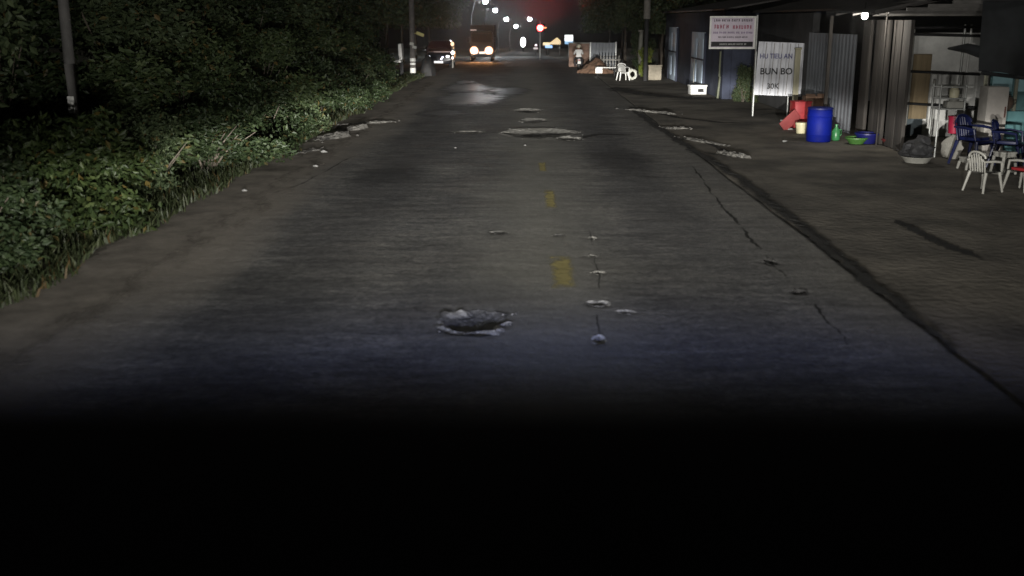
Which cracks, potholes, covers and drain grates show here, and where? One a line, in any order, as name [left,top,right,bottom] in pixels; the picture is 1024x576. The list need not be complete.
crack [590,232,600,339]
crack [655,110,854,350]
crack [894,220,981,259]
pothole [436,309,517,335]
pothole [499,127,579,139]
